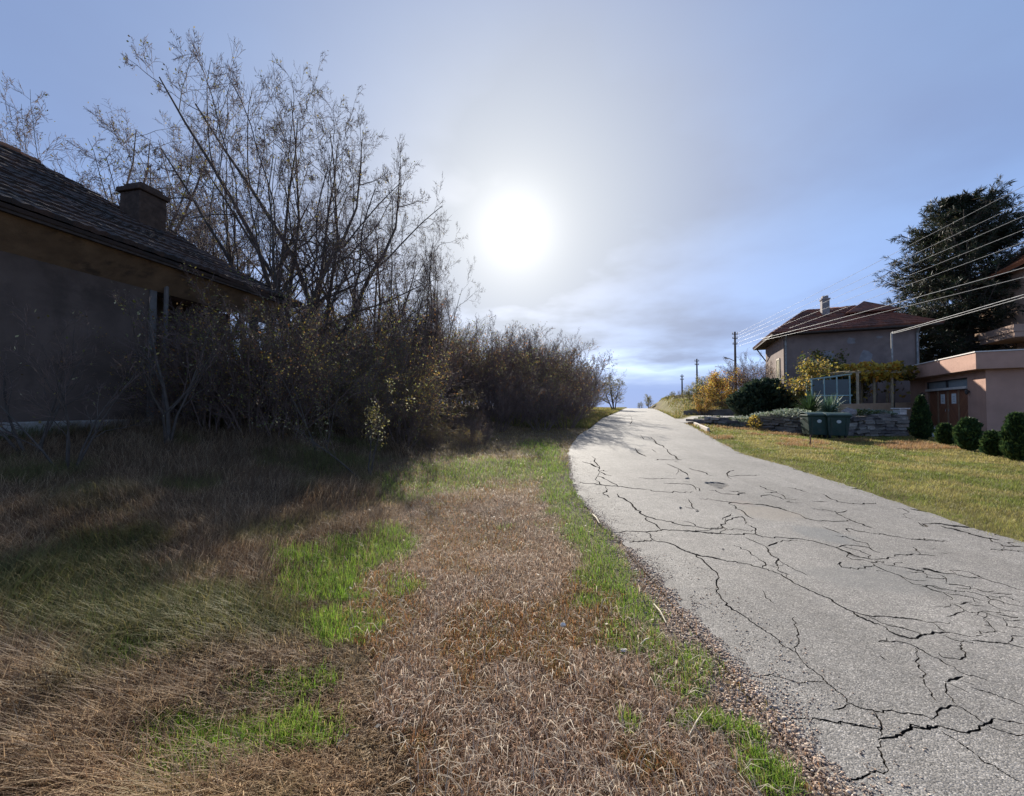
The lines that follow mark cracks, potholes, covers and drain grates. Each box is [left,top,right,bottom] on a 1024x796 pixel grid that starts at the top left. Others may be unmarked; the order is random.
crack [580,418,1024,782]
